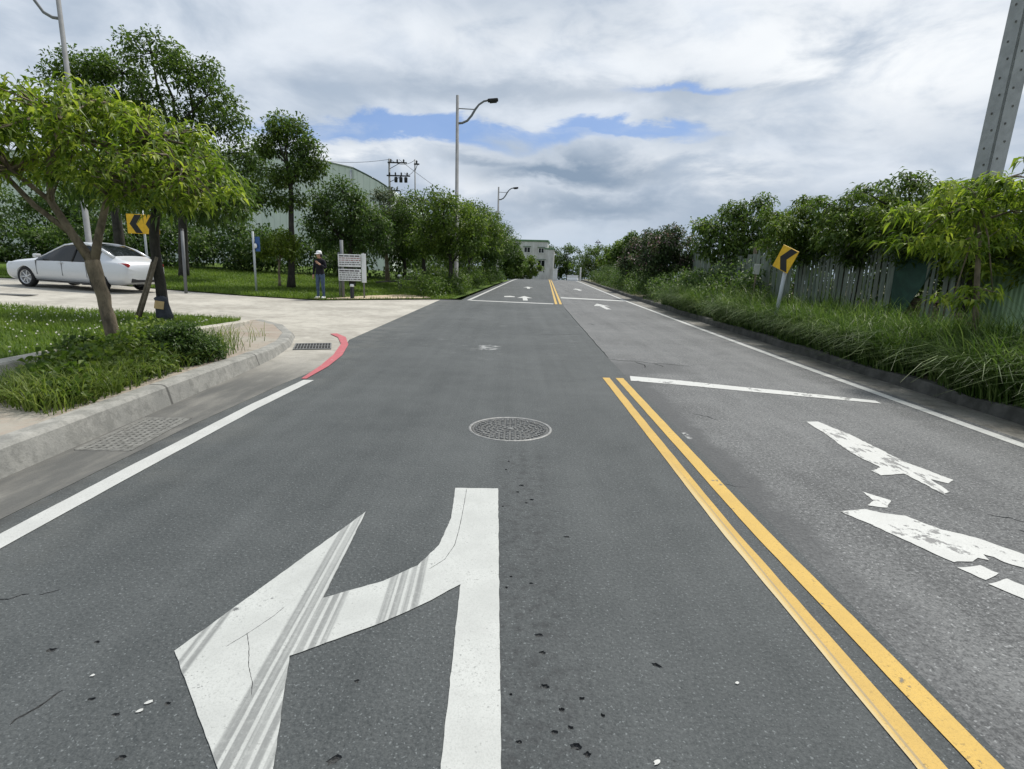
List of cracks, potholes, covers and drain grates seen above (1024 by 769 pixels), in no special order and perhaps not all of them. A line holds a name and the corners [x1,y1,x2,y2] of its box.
manhole cover [468,417,552,441]
crack [232,608,283,695]
